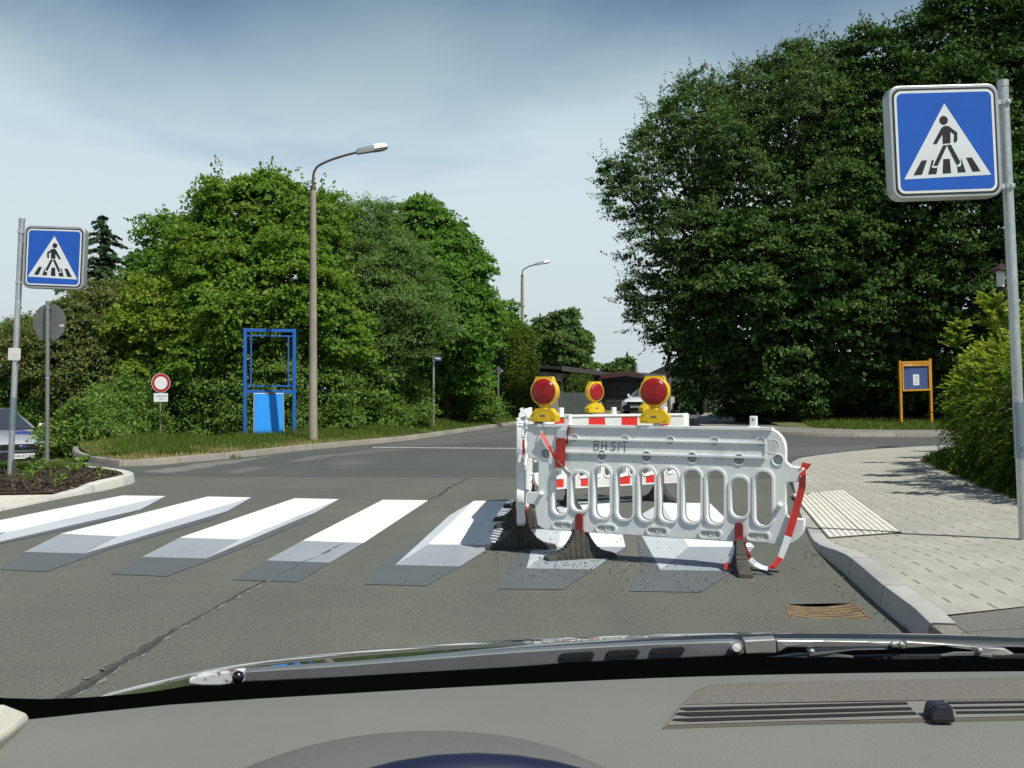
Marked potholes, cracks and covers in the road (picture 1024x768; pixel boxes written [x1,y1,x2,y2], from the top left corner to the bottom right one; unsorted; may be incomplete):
drain grate [785,602,872,619]
